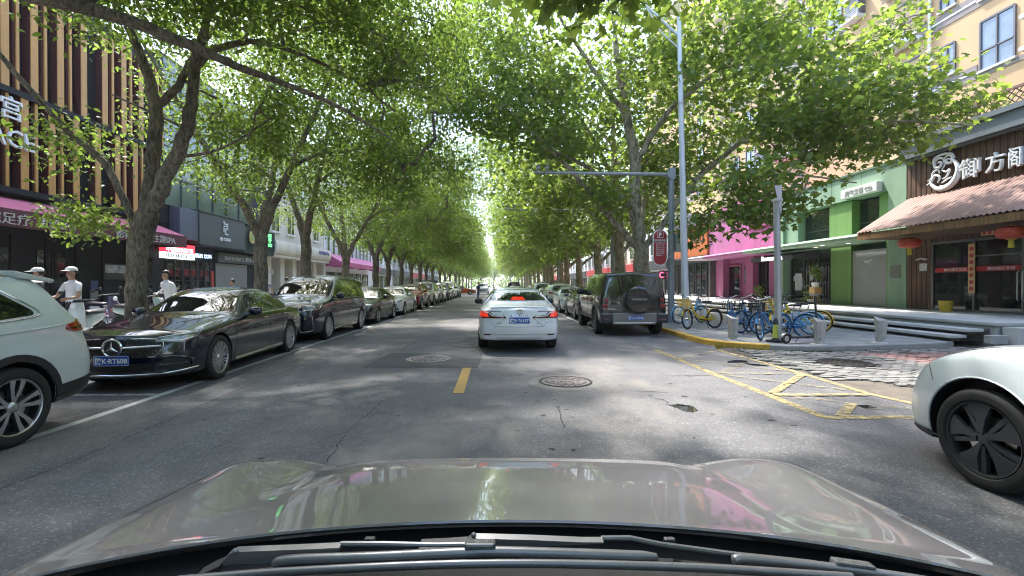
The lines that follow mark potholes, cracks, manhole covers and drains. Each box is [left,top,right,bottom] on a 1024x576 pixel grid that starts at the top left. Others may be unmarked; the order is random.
manhole cover [406,355,450,363]
manhole cover [527,375,604,391]
pothole [666,403,698,413]
